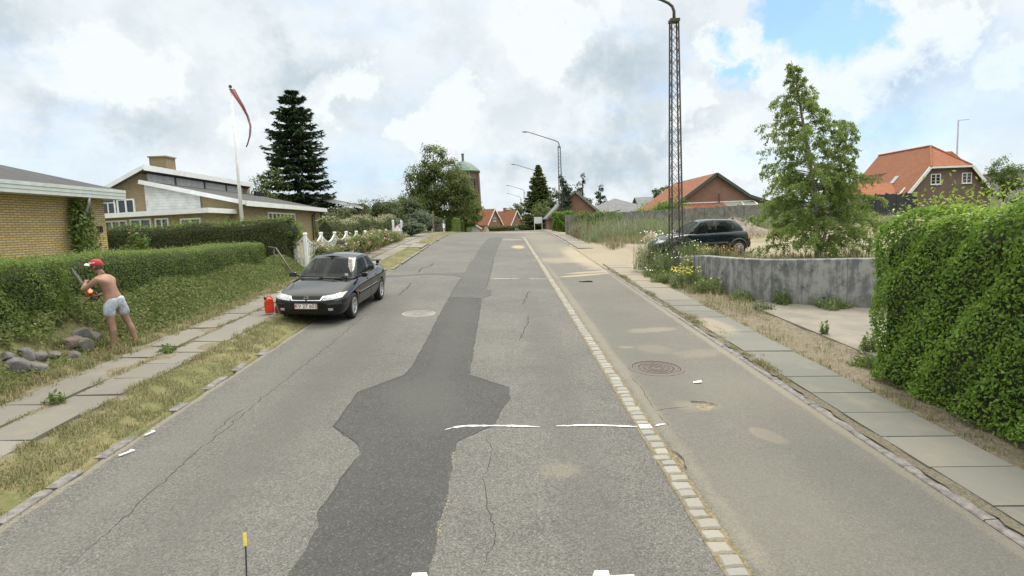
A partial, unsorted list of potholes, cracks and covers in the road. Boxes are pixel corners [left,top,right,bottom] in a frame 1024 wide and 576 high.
pothole [671,450,687,470]
crack [59,319,360,576]
crack [482,431,496,575]
manhole cover [628,360,685,376]
pothole [690,401,717,410]
